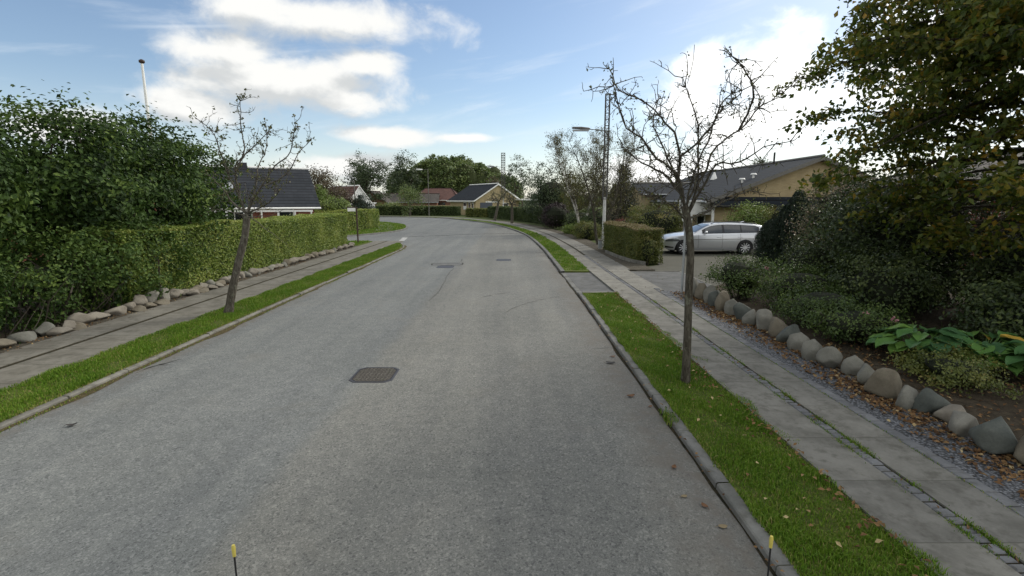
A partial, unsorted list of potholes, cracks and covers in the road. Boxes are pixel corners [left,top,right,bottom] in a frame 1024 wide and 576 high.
manhole cover [348,367,400,383]
